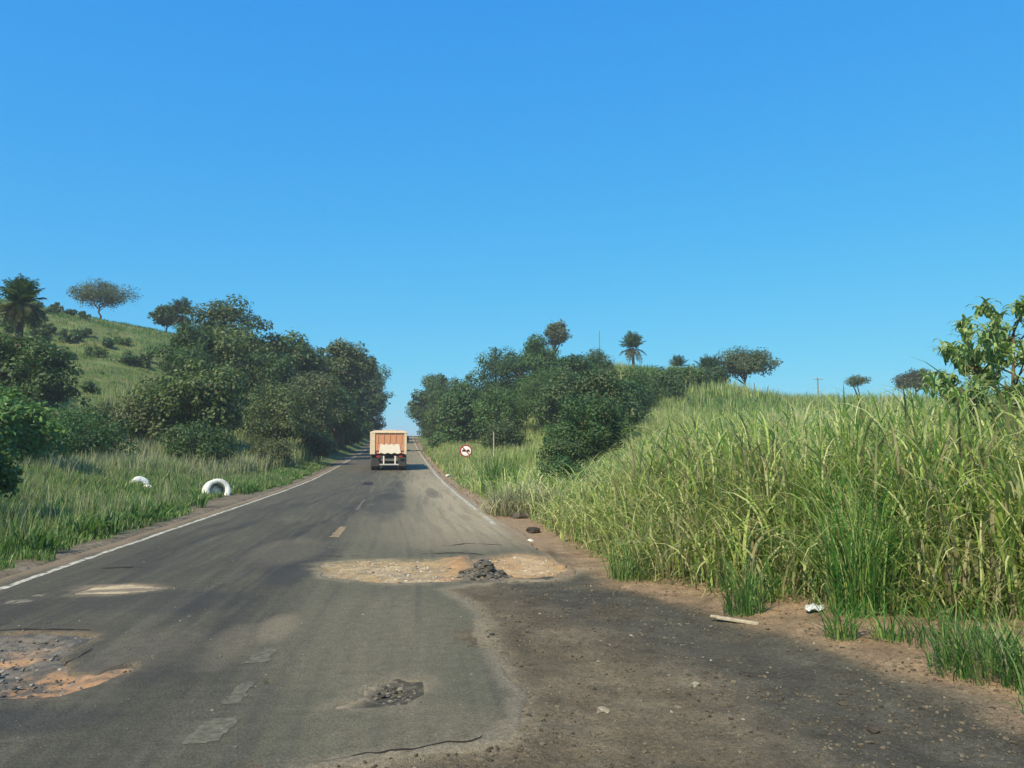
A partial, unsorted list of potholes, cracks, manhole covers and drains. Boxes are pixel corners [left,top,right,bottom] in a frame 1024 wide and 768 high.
pothole [336,679,424,709]
pothole [491,556,576,578]
pothole [0,633,136,699]
crack [296,730,487,767]
pothole [317,555,474,584]
